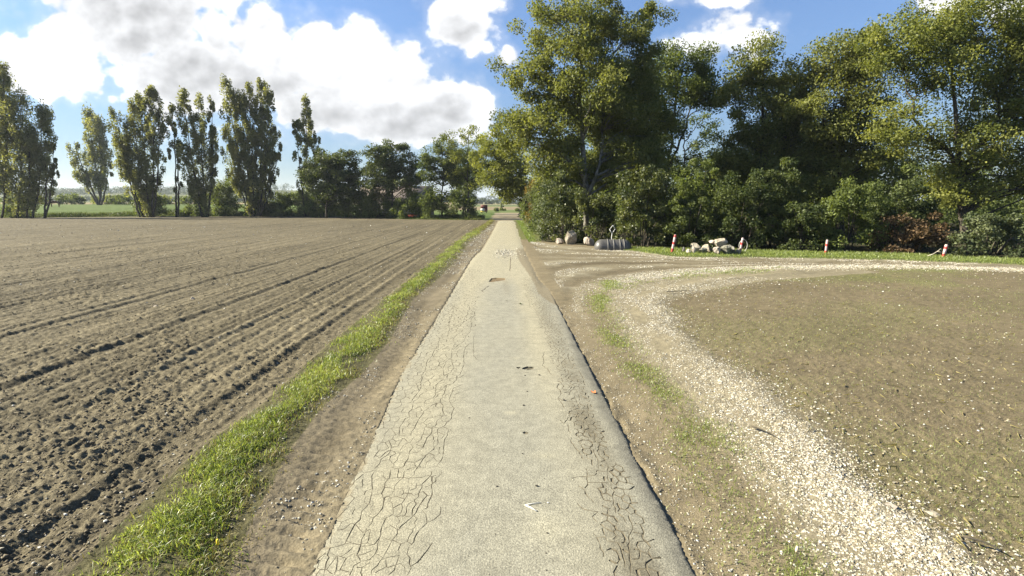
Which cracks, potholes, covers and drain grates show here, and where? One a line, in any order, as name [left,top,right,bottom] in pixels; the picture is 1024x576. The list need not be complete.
crack [316,270,481,576]
crack [523,254,660,576]
